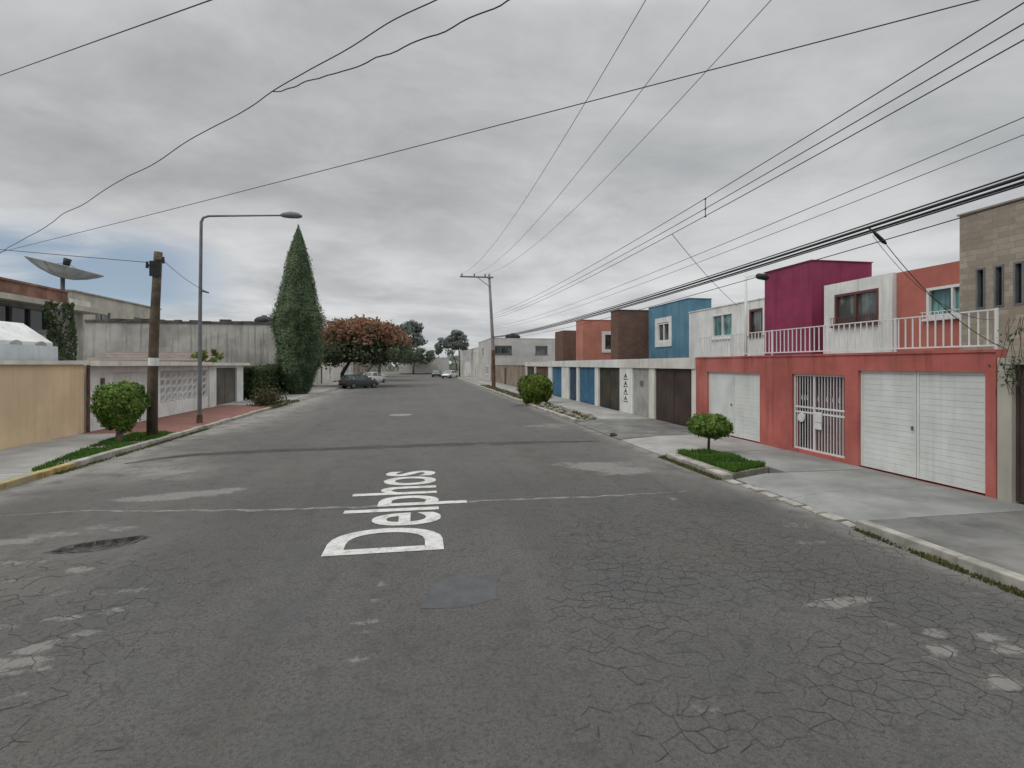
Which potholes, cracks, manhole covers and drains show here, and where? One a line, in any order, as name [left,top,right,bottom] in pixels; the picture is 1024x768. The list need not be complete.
crack [540,496,1024,762]
crack [0,551,231,751]
pothole [44,535,152,554]
